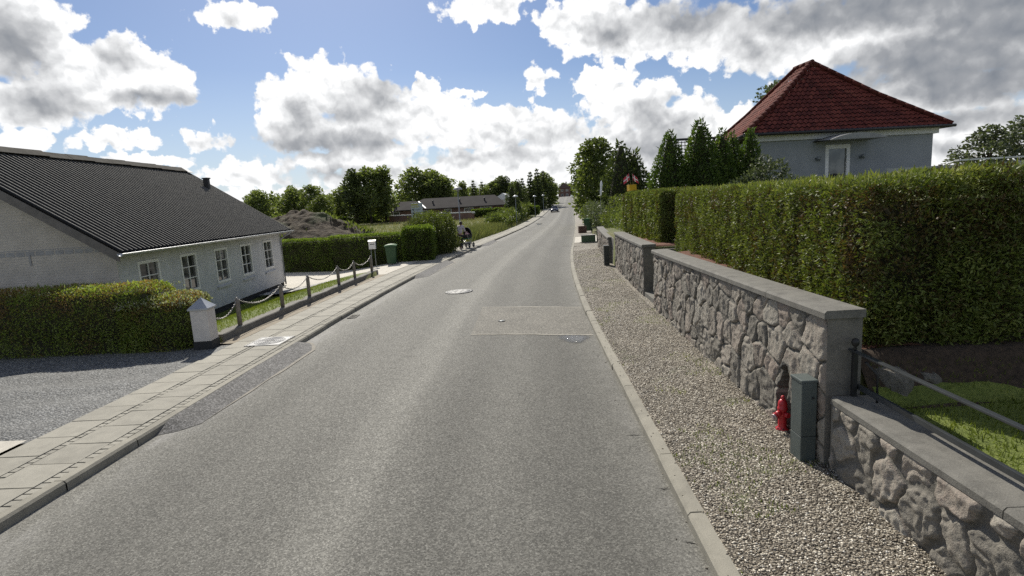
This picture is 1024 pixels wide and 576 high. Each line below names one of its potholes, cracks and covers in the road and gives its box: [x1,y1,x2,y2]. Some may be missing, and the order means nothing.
manhole cover [244,336,295,347]
